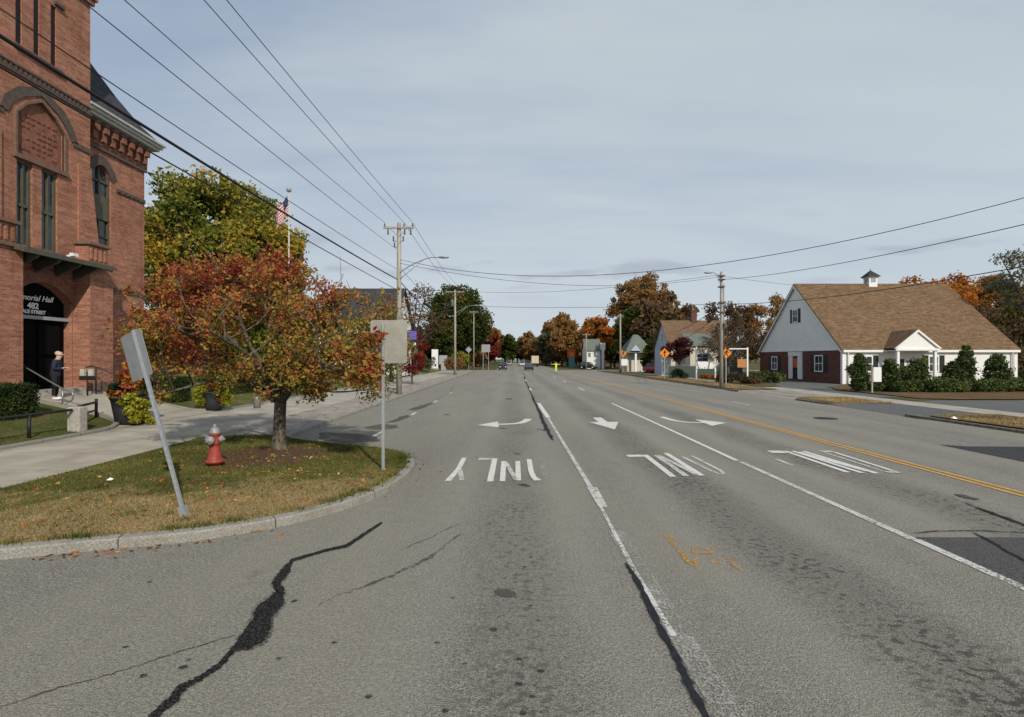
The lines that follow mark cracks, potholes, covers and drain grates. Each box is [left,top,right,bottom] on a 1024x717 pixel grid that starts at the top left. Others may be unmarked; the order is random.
crack [0,635,233,707]
